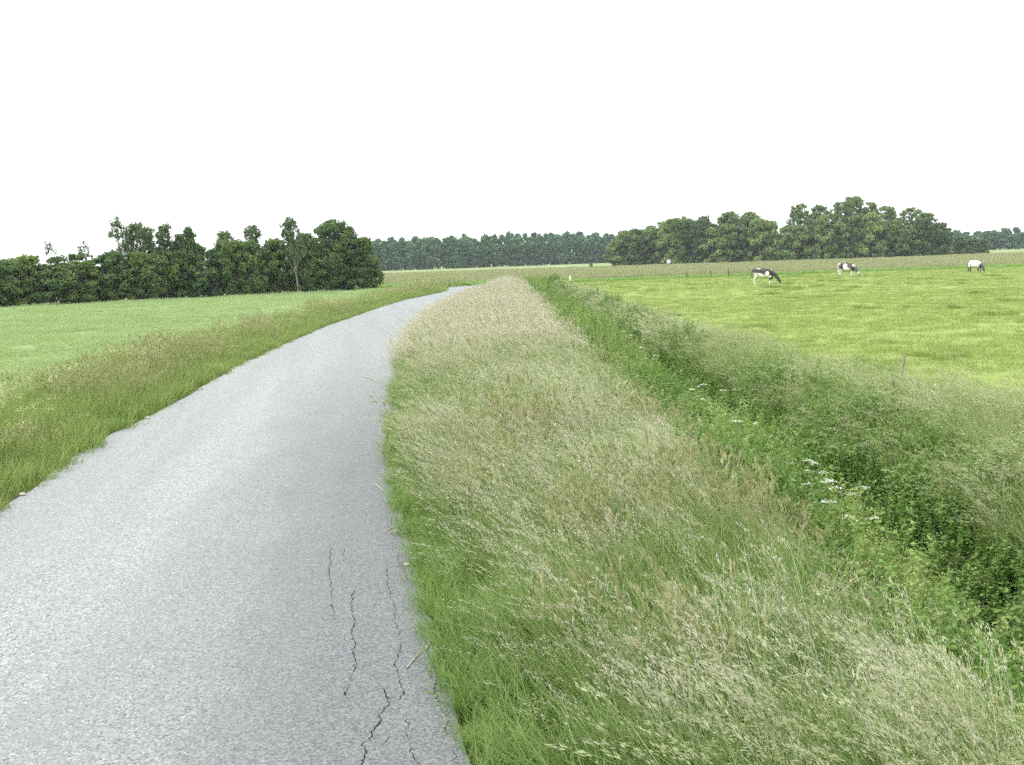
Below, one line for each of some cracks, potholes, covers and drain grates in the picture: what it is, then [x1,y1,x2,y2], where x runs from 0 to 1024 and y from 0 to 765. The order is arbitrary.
crack [328,548,356,696]
crack [361,565,415,765]
